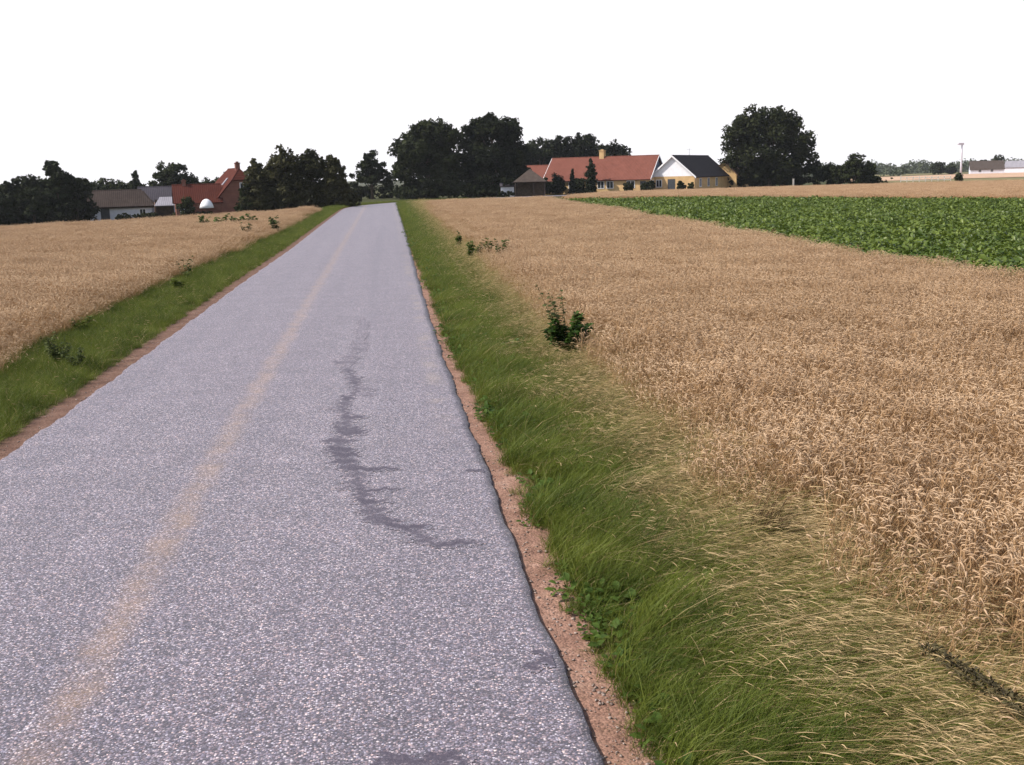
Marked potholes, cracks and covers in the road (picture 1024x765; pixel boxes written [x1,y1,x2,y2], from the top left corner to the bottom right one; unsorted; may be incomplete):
crack [319,317,487,549]
